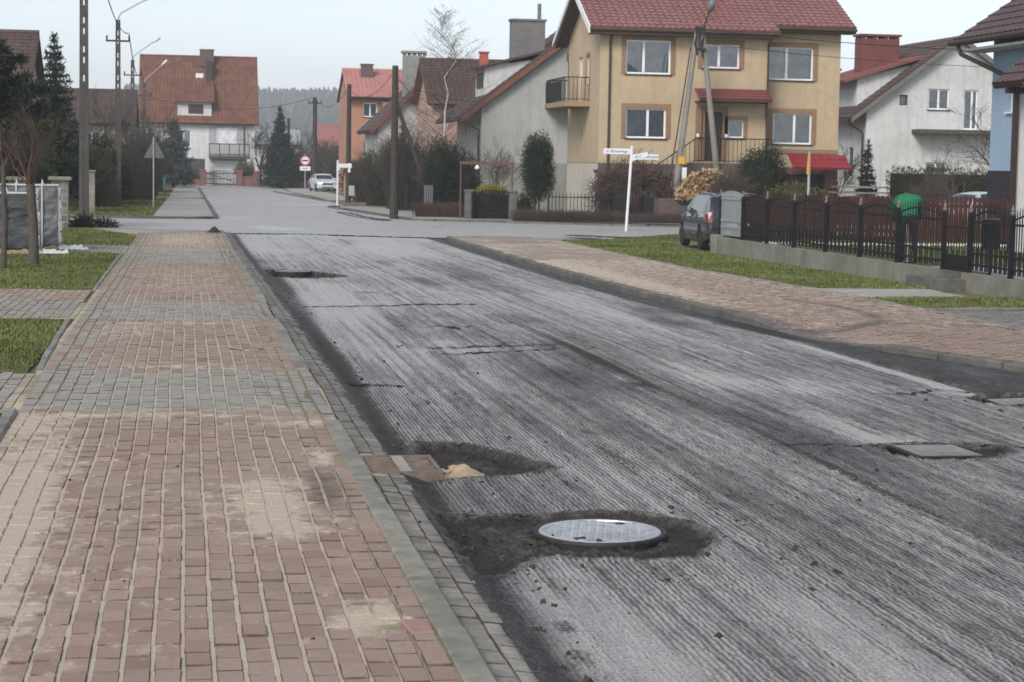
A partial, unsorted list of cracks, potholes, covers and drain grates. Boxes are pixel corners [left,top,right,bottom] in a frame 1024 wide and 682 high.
manhole cover [532,518,667,552]
crack [428,325,560,354]
manhole cover [886,444,988,460]
pothole [263,269,351,279]
pothole [399,440,565,484]
pothole [423,507,721,581]
